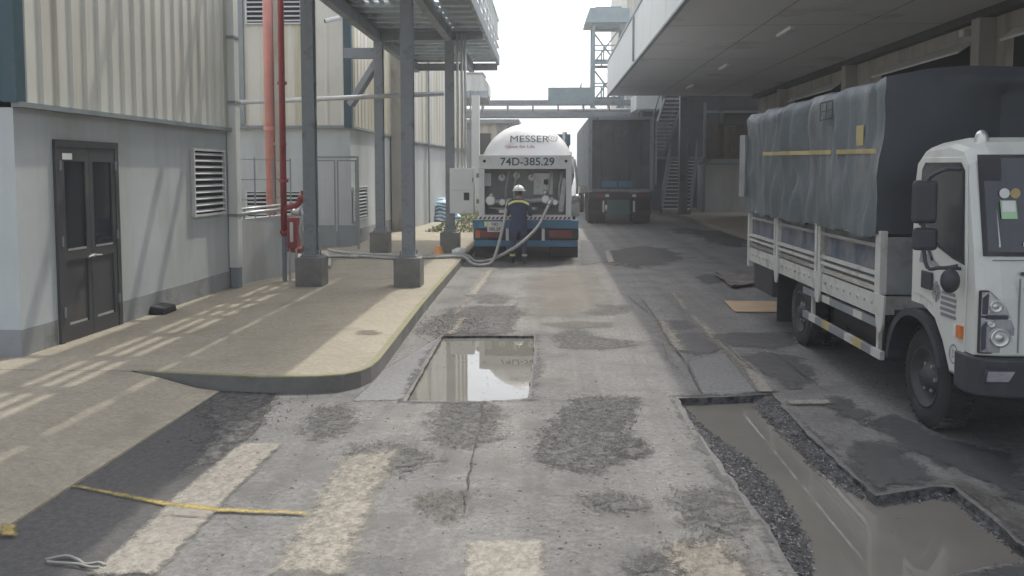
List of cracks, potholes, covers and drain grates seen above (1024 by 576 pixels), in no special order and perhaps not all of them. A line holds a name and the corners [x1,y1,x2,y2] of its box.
crack [539,329,702,393]
crack [463,397,554,517]
pothole [407,335,534,401]
pothole [678,394,1024,576]
